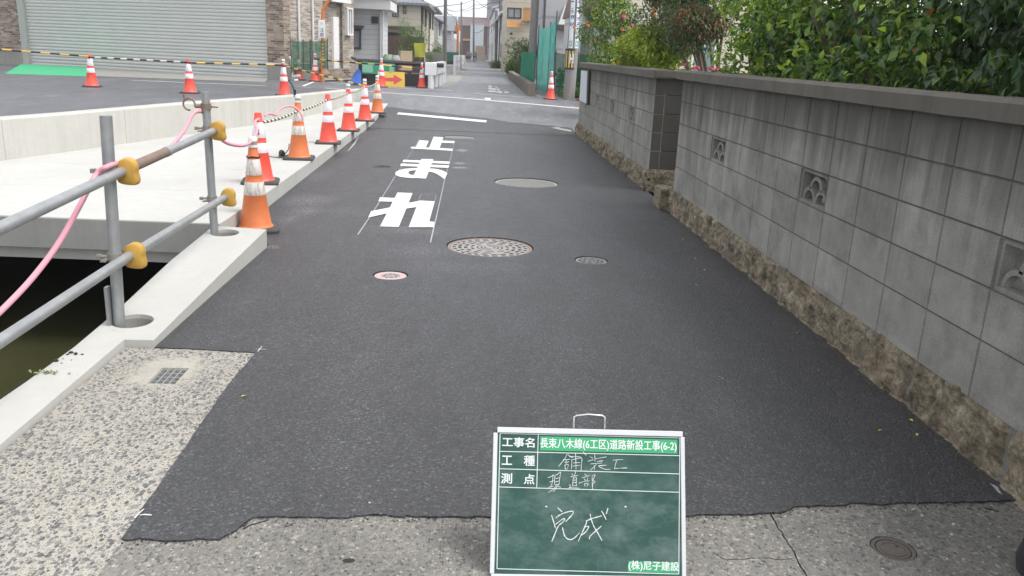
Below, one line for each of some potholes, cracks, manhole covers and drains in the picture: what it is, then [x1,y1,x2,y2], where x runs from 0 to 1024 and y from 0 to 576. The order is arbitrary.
manhole cover [495,179,558,188]
manhole cover [373,272,407,280]
manhole cover [446,238,533,257]
drain grate [149,369,187,384]
manhole cover [870,537,917,561]
